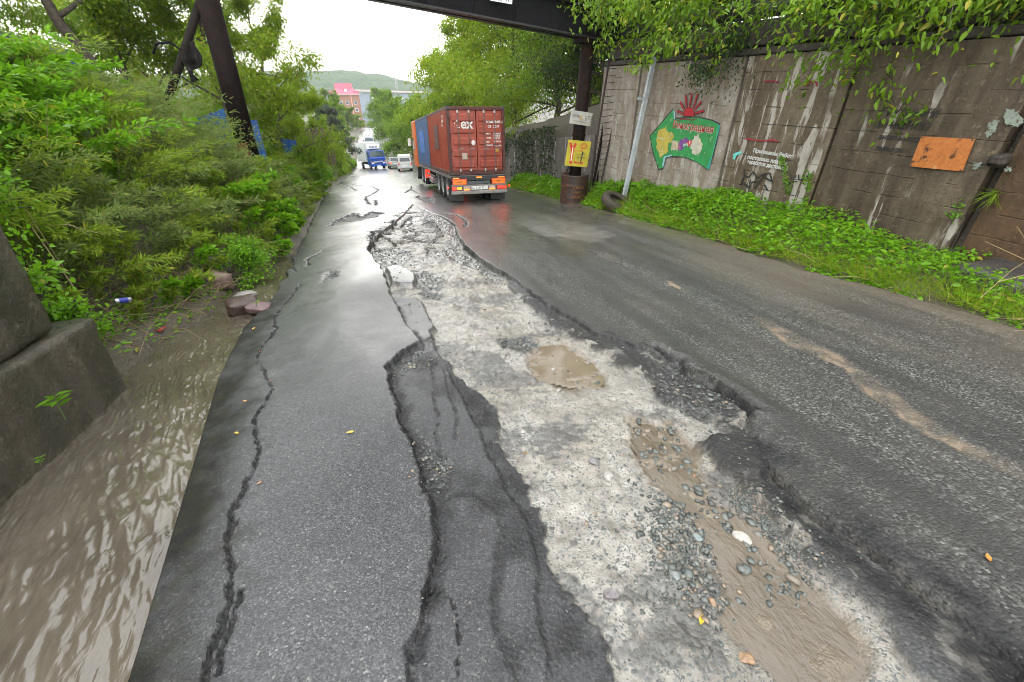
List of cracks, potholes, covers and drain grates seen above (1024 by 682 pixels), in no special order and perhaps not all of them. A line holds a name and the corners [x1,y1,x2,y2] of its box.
crack [200,249,326,682]
crack [342,184,469,258]
pothole [331,211,384,226]
pothole [367,204,1024,682]
